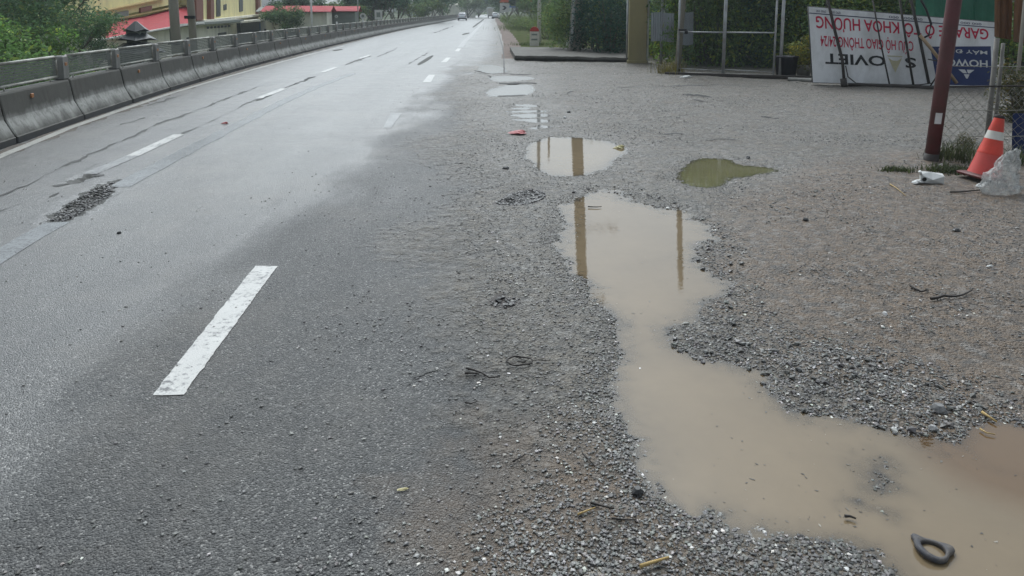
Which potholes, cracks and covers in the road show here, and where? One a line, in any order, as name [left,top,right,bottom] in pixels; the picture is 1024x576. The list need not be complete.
pothole [667,155,787,190]
pothole [488,293,521,309]
pothole [518,135,634,178]
pothole [474,64,510,74]
pothole [546,186,1024,576]
pothole [480,83,541,97]
pothole [39,179,122,225]
pothole [501,102,565,130]
